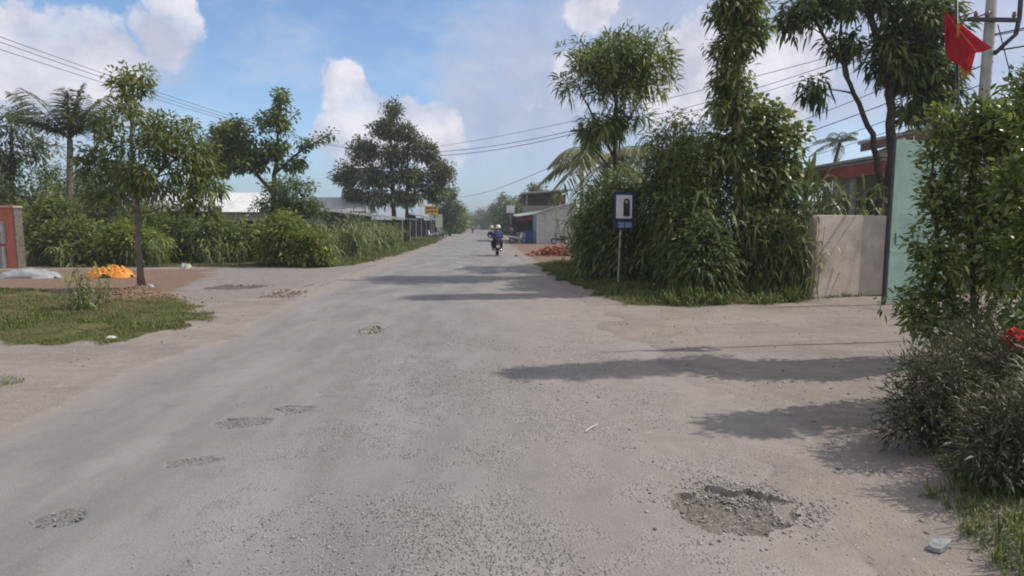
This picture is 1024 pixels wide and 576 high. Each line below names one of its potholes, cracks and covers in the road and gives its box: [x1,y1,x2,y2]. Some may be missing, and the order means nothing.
pothole [658,483,807,540]
pothole [211,417,274,429]
pothole [29,509,86,527]
pothole [273,406,316,415]
pothole [165,455,224,468]
